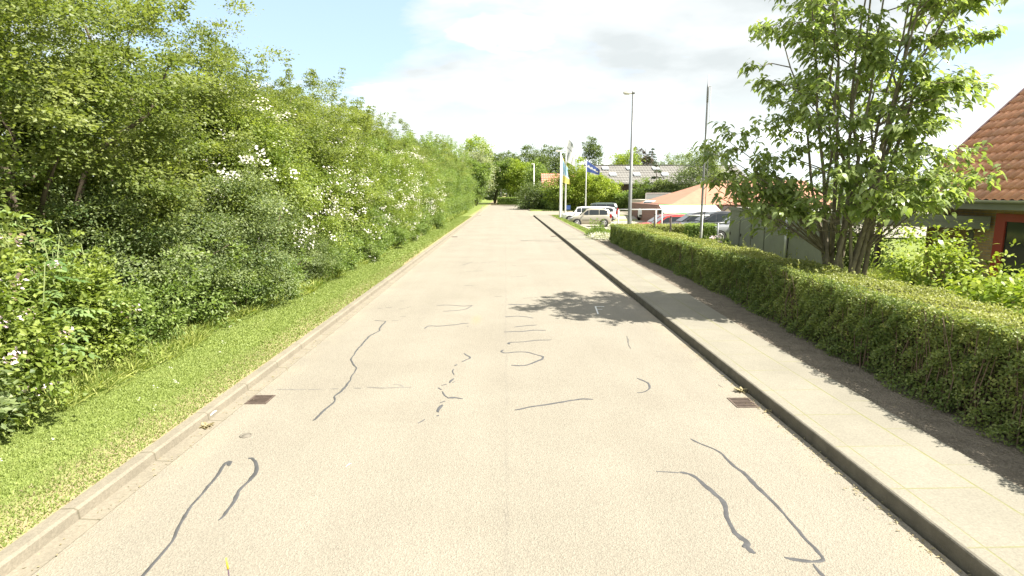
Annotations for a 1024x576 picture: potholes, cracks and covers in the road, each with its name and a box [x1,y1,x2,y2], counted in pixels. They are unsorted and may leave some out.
crack [500,304,544,366]
drain grate [727,398,760,408]
crack [515,398,593,410]
drain grate [244,395,276,404]
crack [418,353,471,423]
